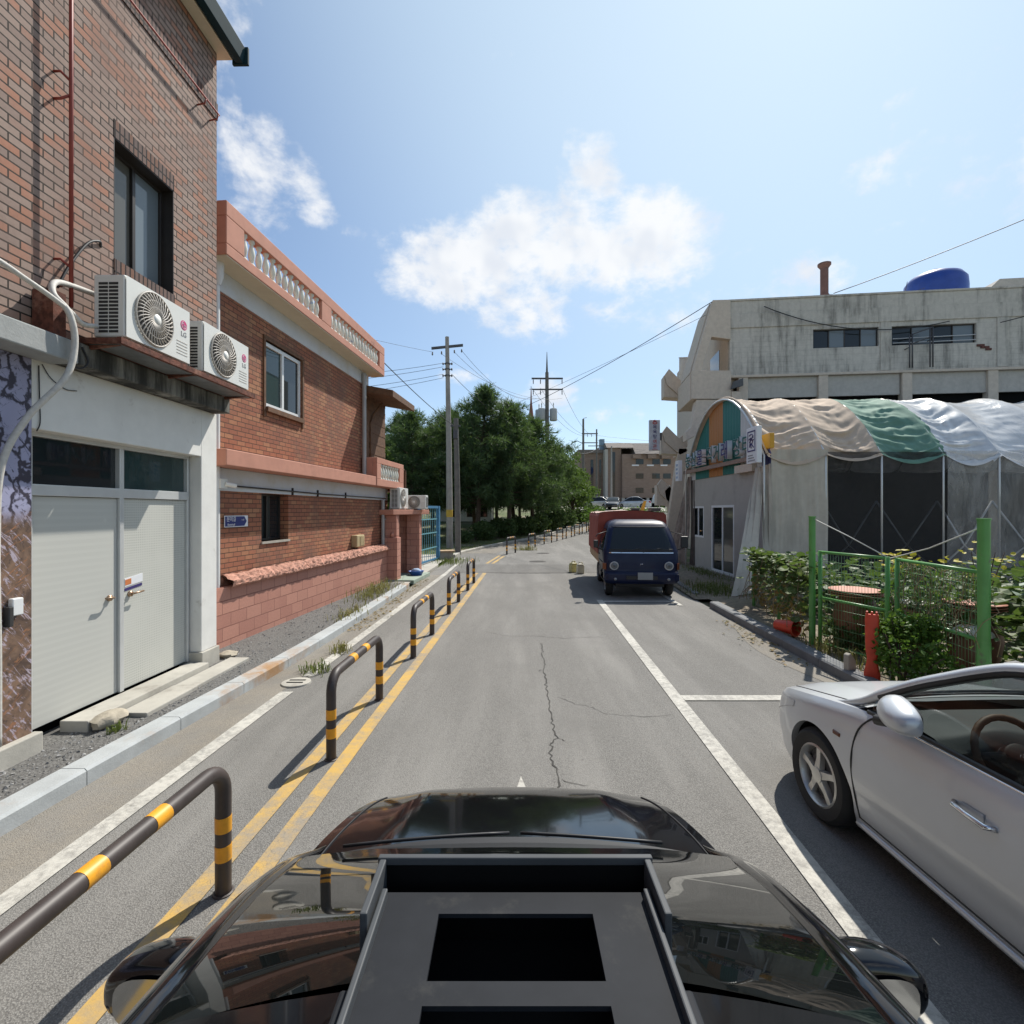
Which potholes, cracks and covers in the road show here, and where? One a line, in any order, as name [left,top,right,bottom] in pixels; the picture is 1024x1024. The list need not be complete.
crack [495,633,669,788]
